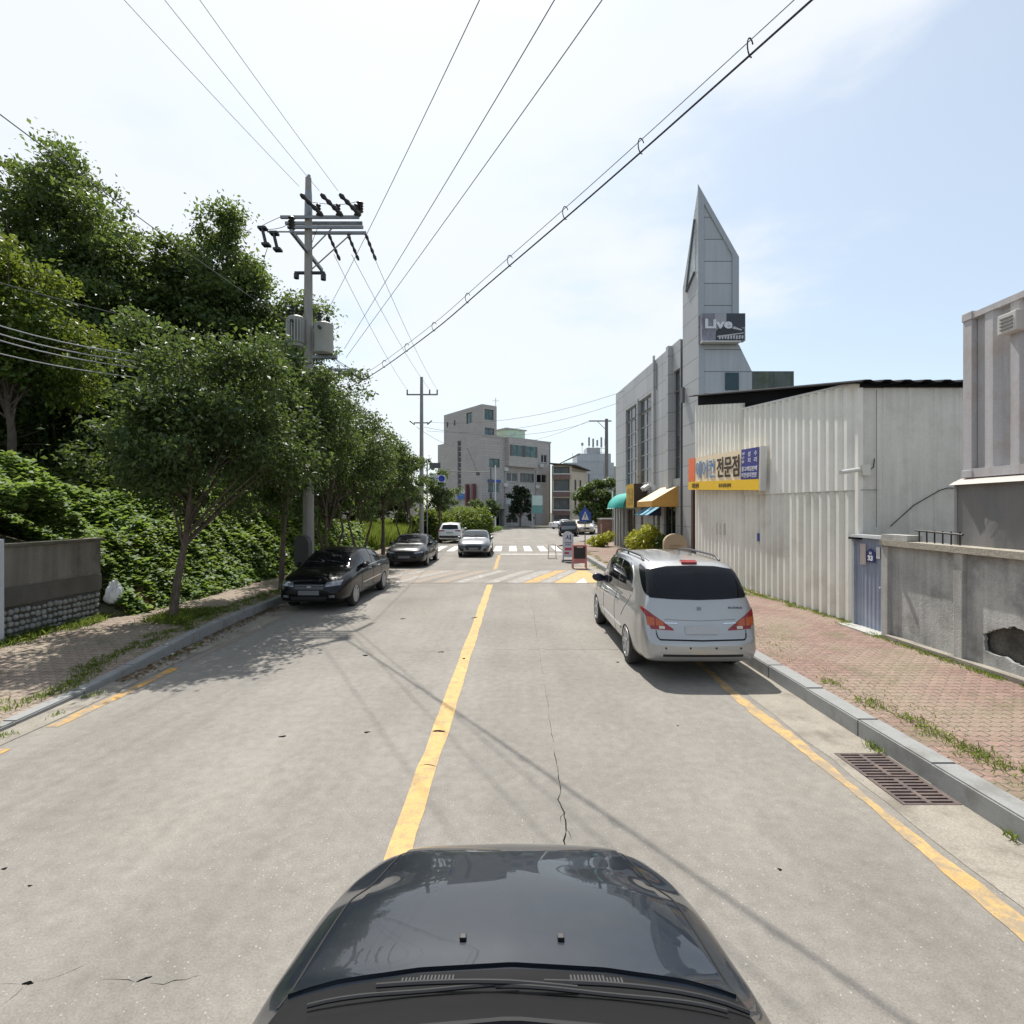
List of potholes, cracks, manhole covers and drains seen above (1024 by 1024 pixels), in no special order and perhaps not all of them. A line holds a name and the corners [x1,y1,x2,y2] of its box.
drain grate [835,753,918,778]
crack [364,592,615,845]
drain grate [867,777,961,805]
